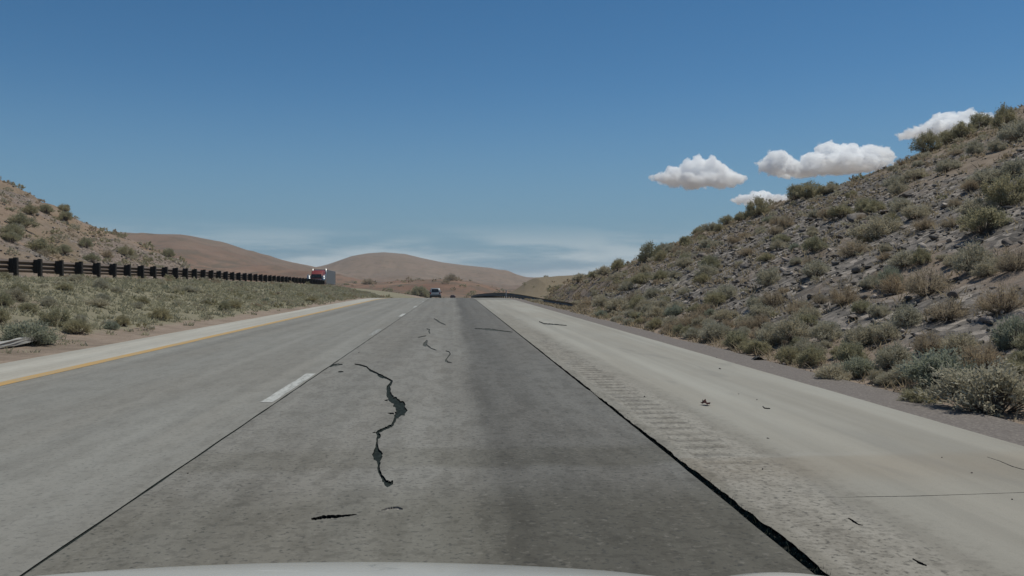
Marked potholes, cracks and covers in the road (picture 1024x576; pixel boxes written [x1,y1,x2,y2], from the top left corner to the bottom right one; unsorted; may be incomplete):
crack [418,319,451,363]
